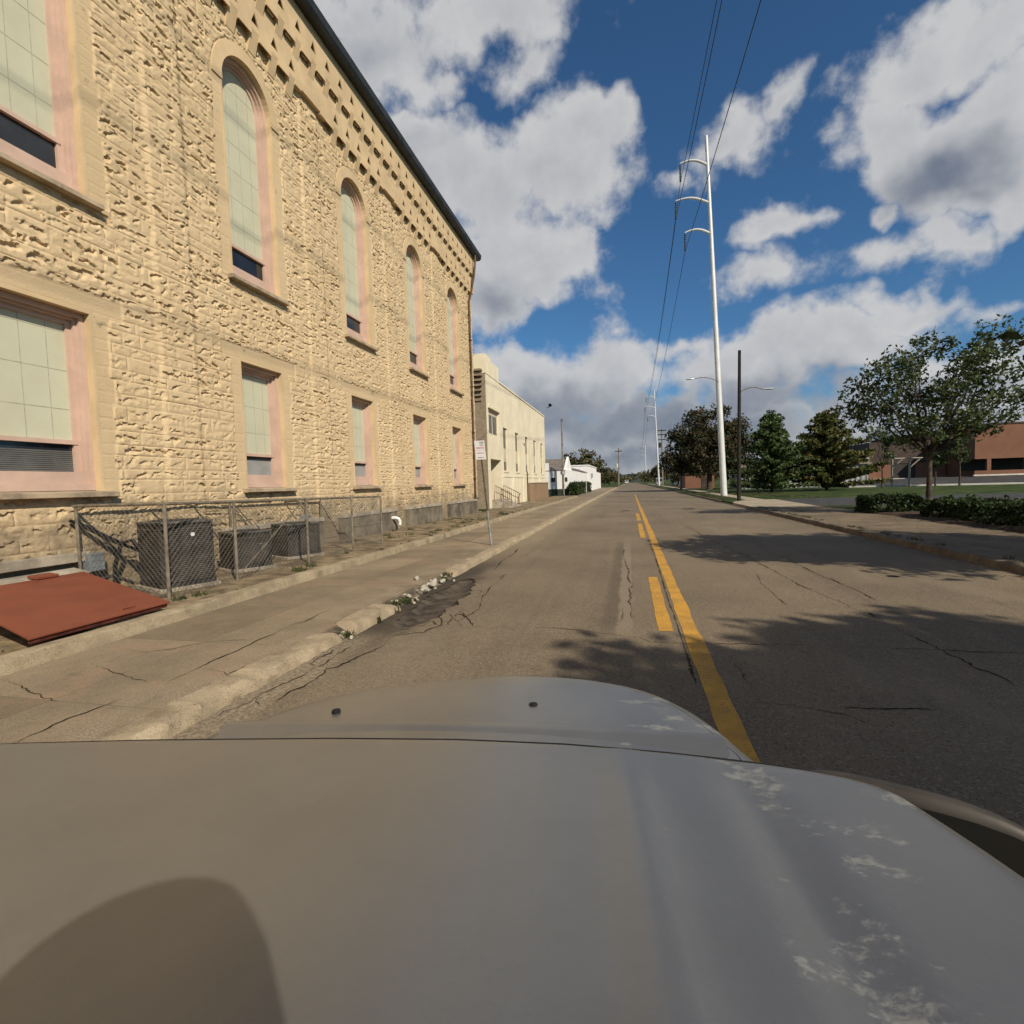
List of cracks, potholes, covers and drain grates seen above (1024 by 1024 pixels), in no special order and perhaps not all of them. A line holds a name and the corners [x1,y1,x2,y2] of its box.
crack [216,632,404,717]
crack [400,521,1023,686]
crack [734,664,936,731]
